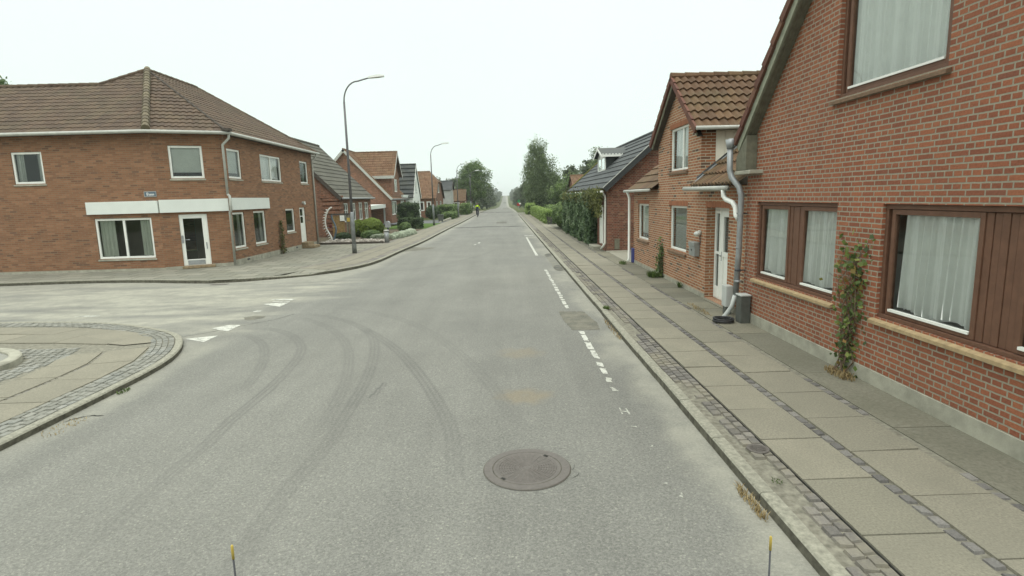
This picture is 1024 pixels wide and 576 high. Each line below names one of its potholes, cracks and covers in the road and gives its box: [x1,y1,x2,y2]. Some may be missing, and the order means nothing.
manhole cover [483,449,571,491]
utility cover [746,444,770,454]
